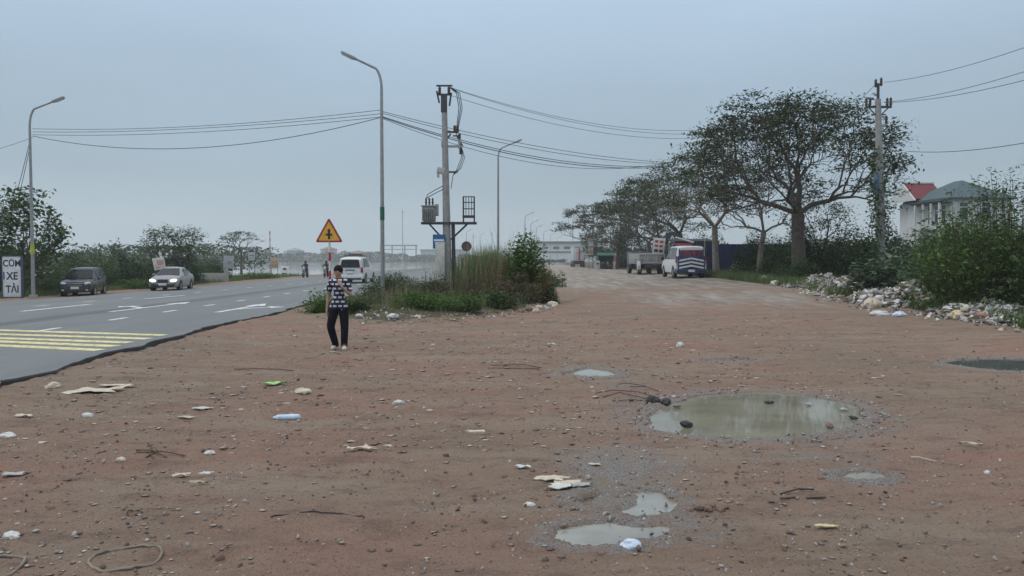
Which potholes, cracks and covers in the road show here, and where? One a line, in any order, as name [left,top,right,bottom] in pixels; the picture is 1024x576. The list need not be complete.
pothole [589,383,925,457]
pothole [509,506,732,569]
pothole [898,355,1024,375]
pothole [538,473,665,523]
pothole [587,468,728,536]
